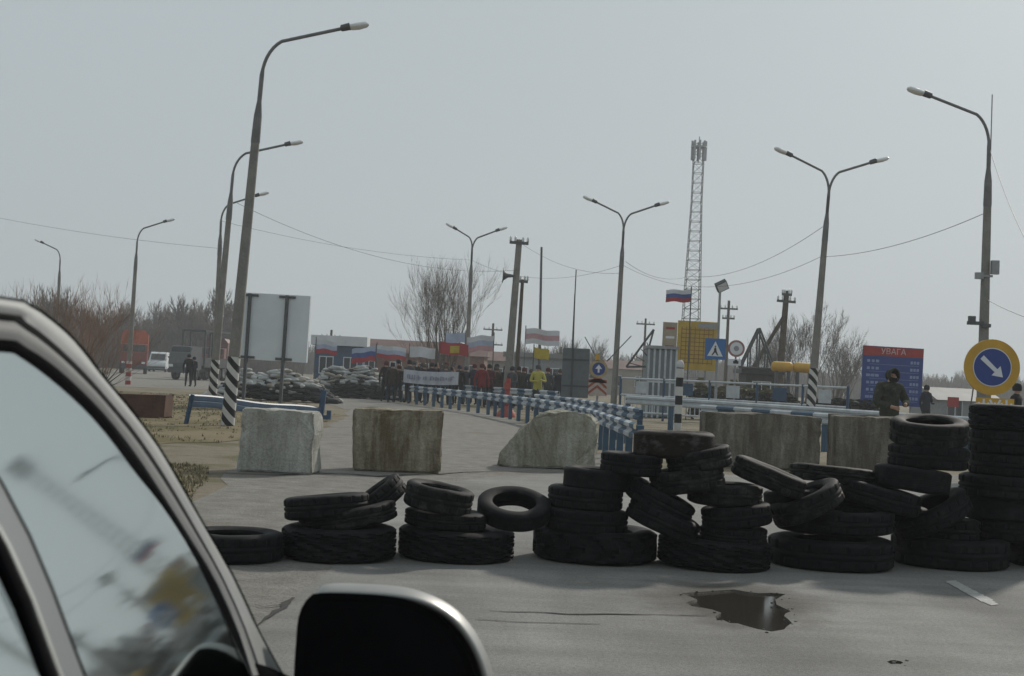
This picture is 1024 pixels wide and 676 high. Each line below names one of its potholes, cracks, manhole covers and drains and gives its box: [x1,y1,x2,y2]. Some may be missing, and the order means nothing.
crack [478,610,707,624]
crack [255,597,295,624]
